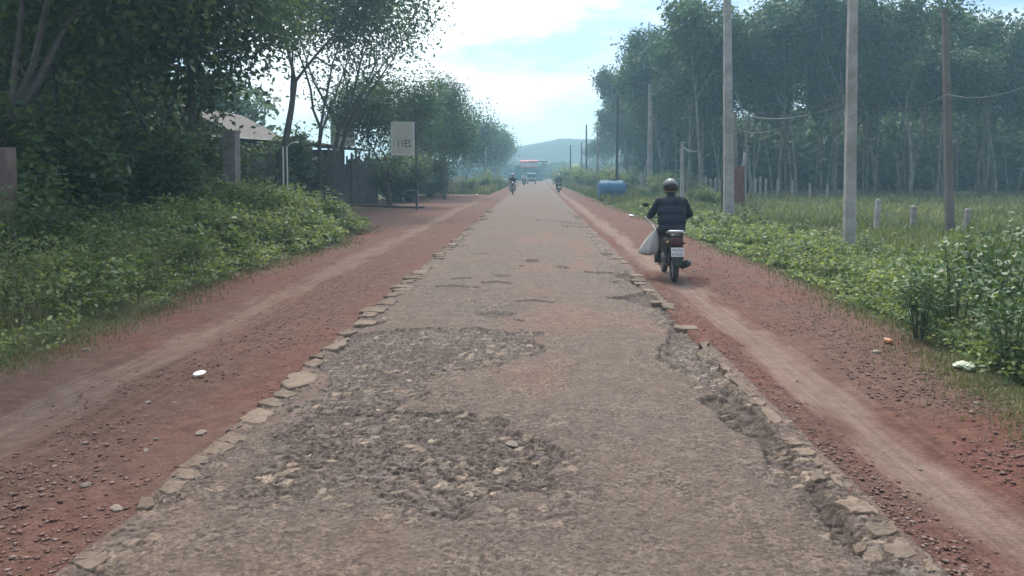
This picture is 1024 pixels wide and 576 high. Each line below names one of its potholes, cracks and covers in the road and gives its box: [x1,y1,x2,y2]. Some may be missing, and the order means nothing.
pothole [283,326,565,417]
pothole [270,407,578,524]
pothole [653,309,728,390]
pothole [695,382,809,482]
pothole [473,310,518,318]
